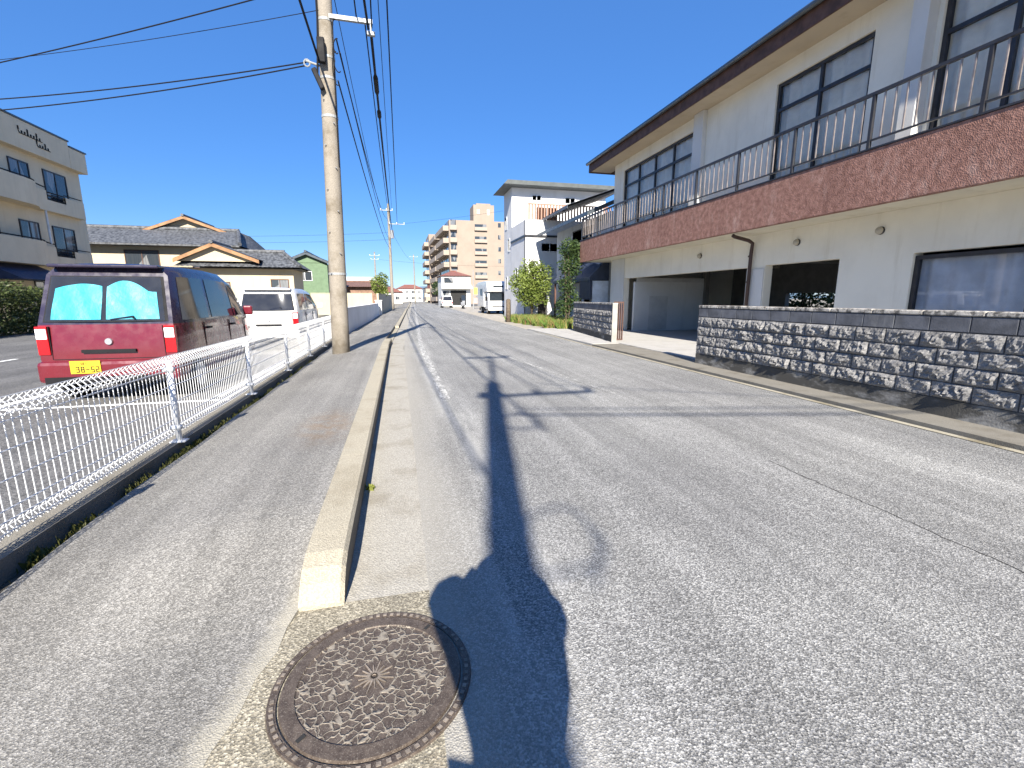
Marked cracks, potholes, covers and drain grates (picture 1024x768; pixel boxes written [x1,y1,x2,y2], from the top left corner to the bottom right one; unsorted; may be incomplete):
manhole cover [265,612,471,768]
crack [769,460,1024,572]
